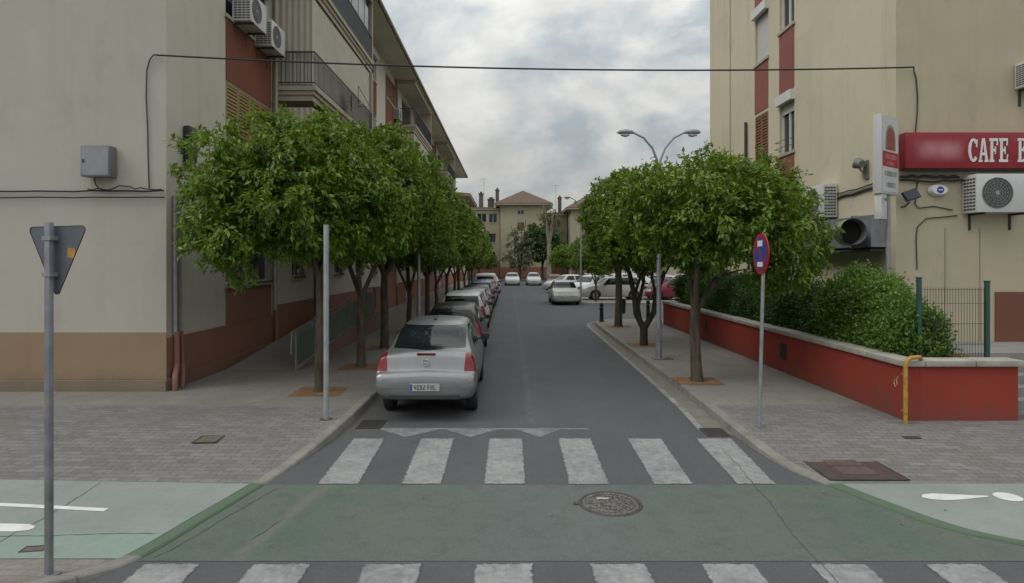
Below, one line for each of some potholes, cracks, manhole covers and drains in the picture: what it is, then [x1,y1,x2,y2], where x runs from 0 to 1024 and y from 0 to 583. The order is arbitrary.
drain grate [355,420,387,429]
manhole cover [573,491,643,517]
utility cover [192,435,225,443]
utility cover [803,460,911,480]
drain grate [699,428,731,436]
utility cover [18,545,44,553]
crack [724,452,838,583]
crack [155,489,276,557]
